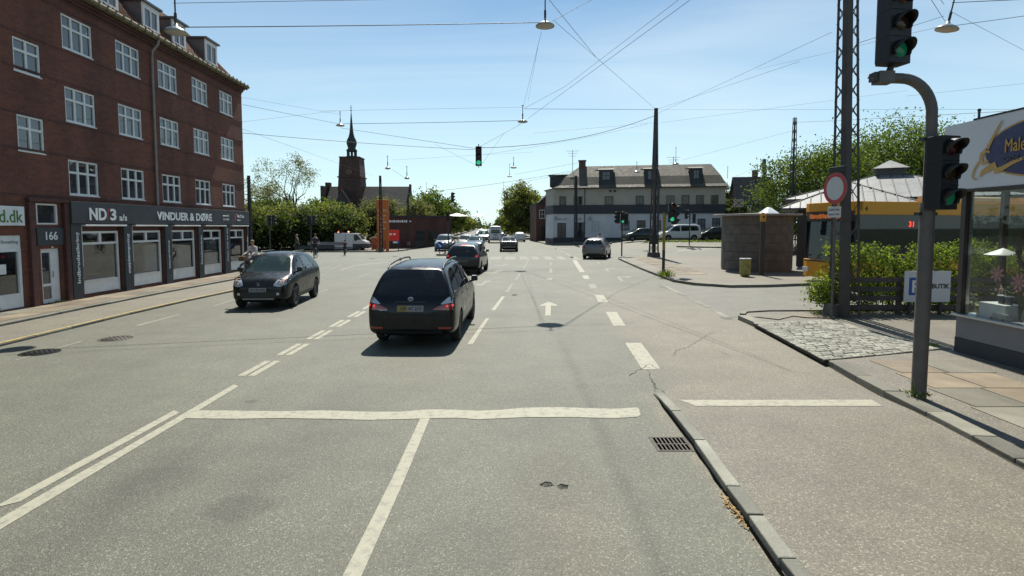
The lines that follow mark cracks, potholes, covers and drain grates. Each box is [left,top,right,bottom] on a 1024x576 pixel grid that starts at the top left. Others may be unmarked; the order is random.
drain grate [648,437,695,451]
